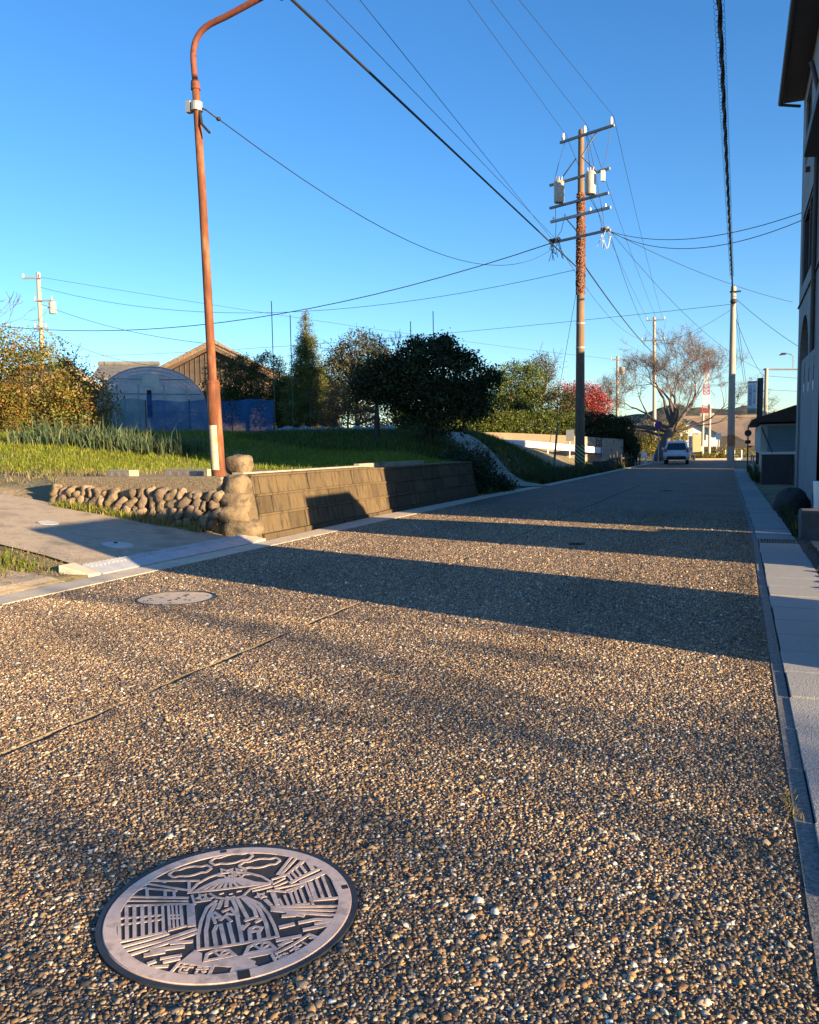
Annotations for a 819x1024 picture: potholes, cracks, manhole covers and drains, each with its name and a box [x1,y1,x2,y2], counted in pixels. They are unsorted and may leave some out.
manhole cover [95,845,358,993]
manhole cover [135,591,217,605]
